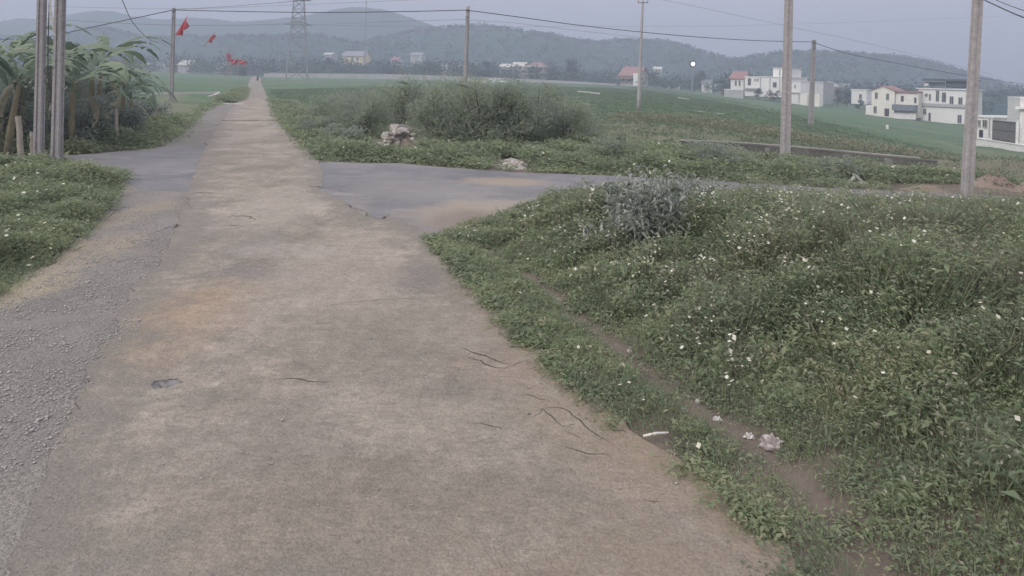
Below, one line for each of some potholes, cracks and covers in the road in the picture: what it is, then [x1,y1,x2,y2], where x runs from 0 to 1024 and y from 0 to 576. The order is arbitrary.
crack [533,396,613,455]
crack [318,187,387,220]
pothole [152,380,184,389]
